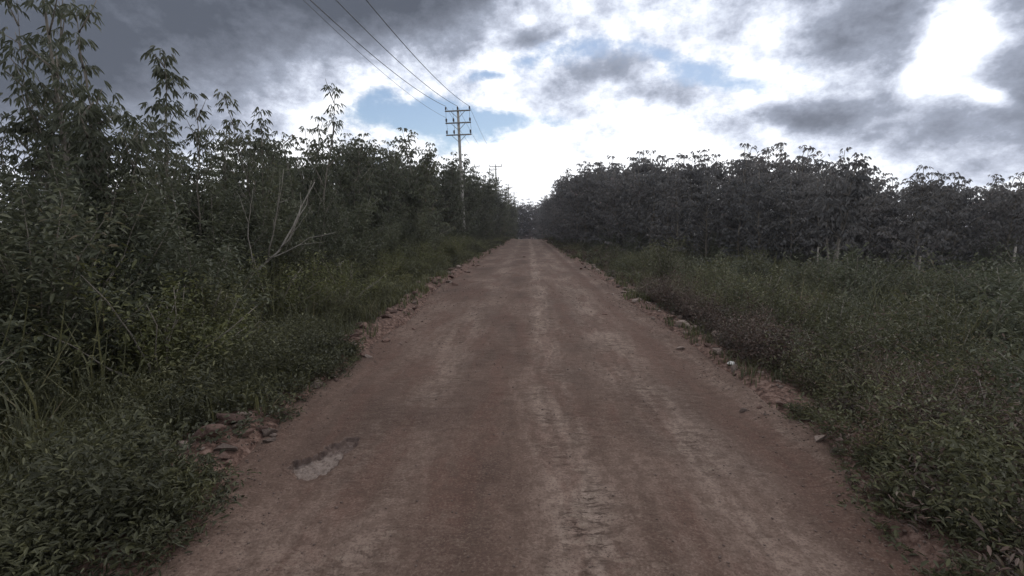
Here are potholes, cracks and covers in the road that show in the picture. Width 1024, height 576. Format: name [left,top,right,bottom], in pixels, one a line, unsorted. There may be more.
pothole [281,434,363,483]
